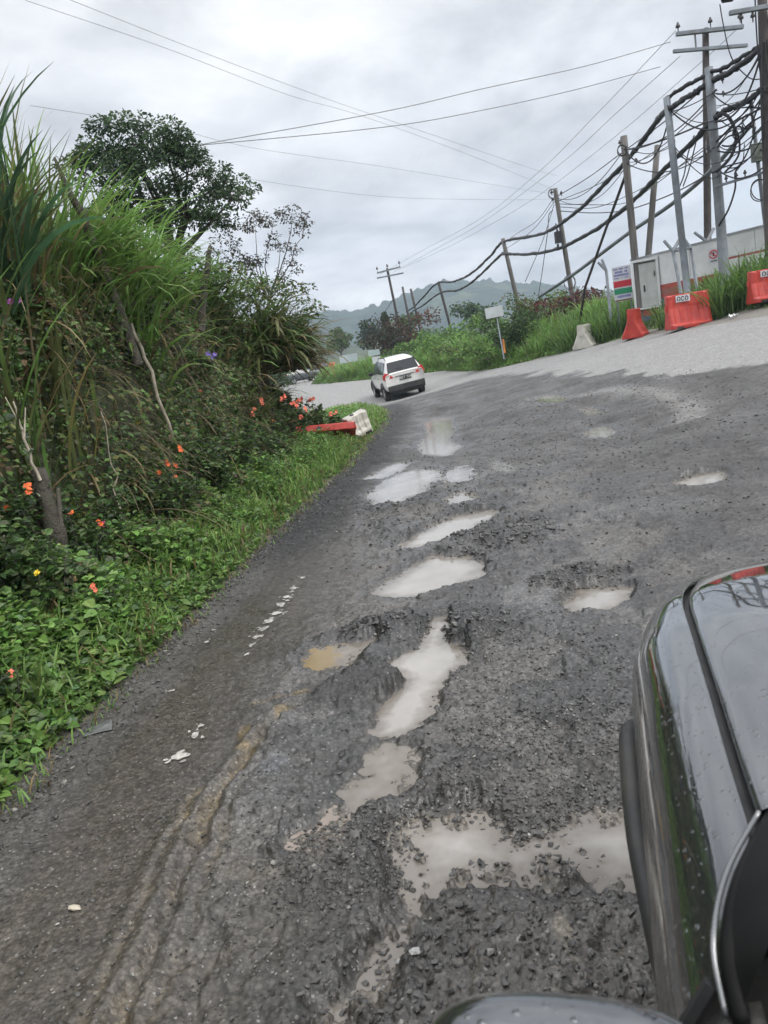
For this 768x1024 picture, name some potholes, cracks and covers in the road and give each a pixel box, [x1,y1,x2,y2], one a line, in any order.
pothole [389,503,507,550]
pothole [437,489,487,505]
pothole [577,425,623,439]
pothole [551,574,641,612]
pothole [412,416,469,457]
pothole [290,624,385,673]
pothole [438,465,479,483]
pothole [327,737,428,814]
pothole [361,545,496,598]
pothole [278,775,638,1024]
pothole [352,606,478,741]
